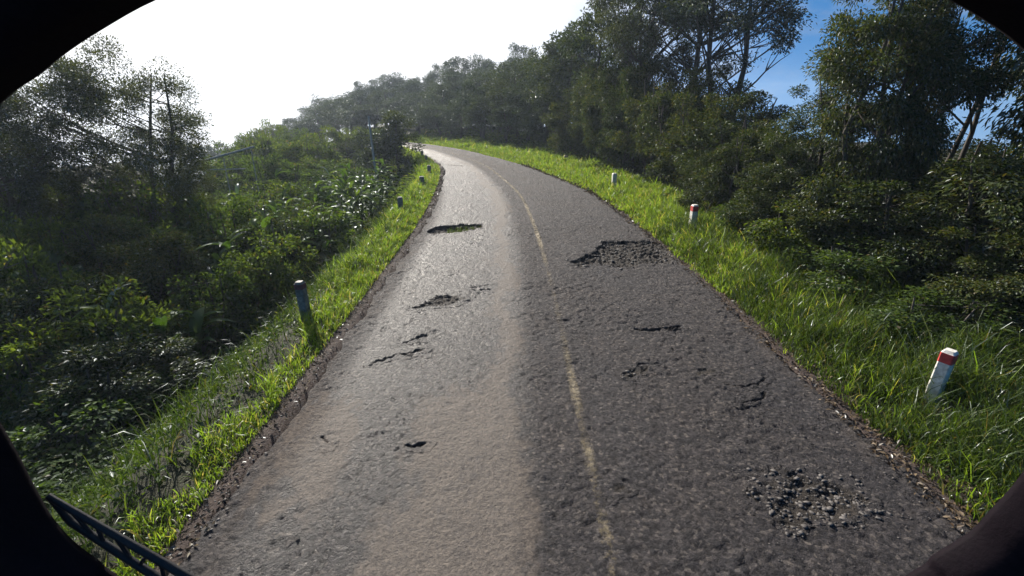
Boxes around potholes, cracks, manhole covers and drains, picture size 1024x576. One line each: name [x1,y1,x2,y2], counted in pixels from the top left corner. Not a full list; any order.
pothole [423,222,487,235]
pothole [615,360,661,381]
pothole [746,462,886,536]
pothole [564,239,679,269]
pothole [405,291,473,312]
